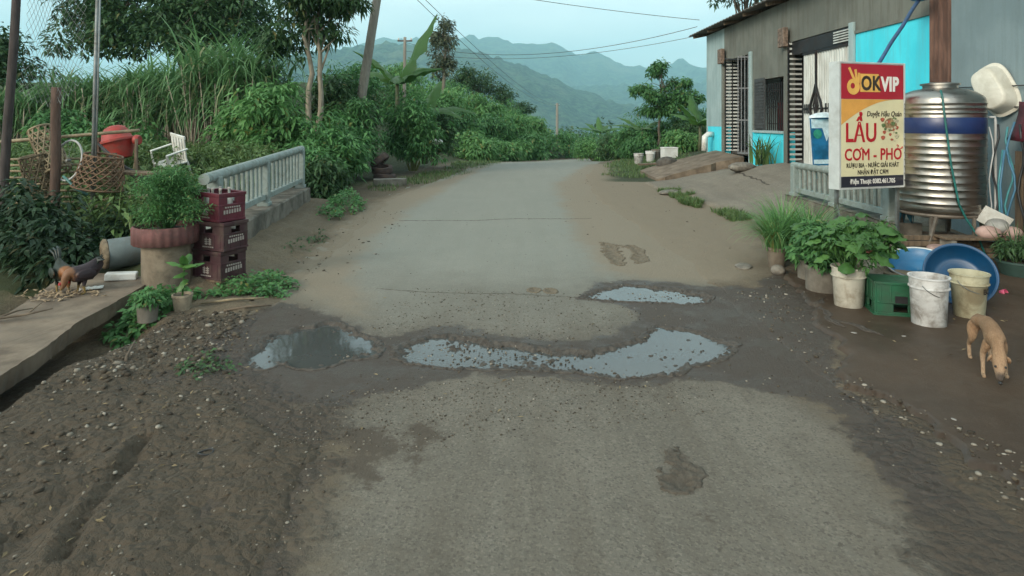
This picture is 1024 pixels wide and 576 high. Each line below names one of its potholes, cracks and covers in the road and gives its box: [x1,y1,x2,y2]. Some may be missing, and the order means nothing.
crack [735,172,770,185]
pothole [576,283,716,306]
pothole [388,324,743,380]
pothole [237,319,386,372]
